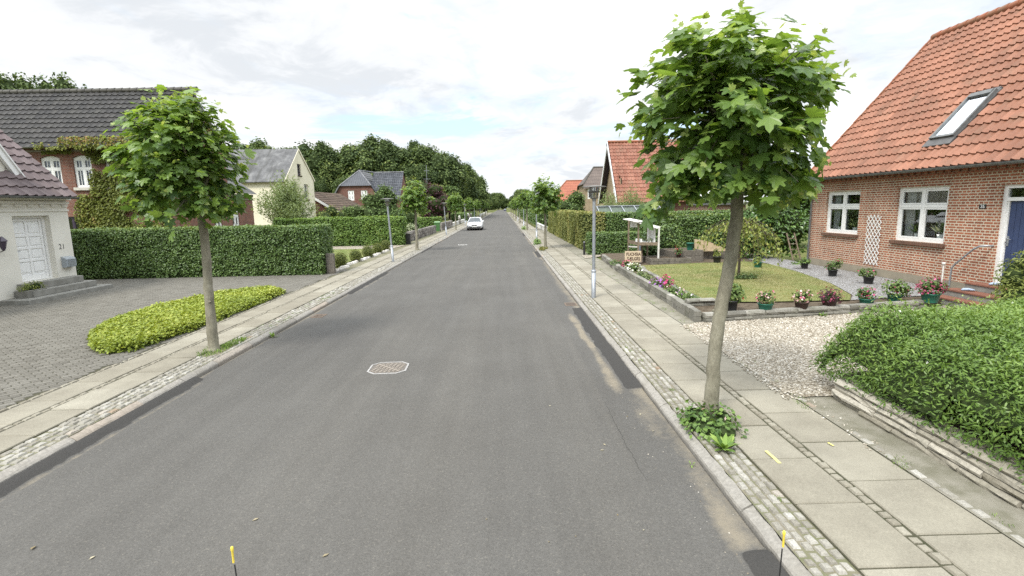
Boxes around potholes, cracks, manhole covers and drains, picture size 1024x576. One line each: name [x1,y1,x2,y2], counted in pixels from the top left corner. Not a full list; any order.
manhole cover [367,361,409,375]
